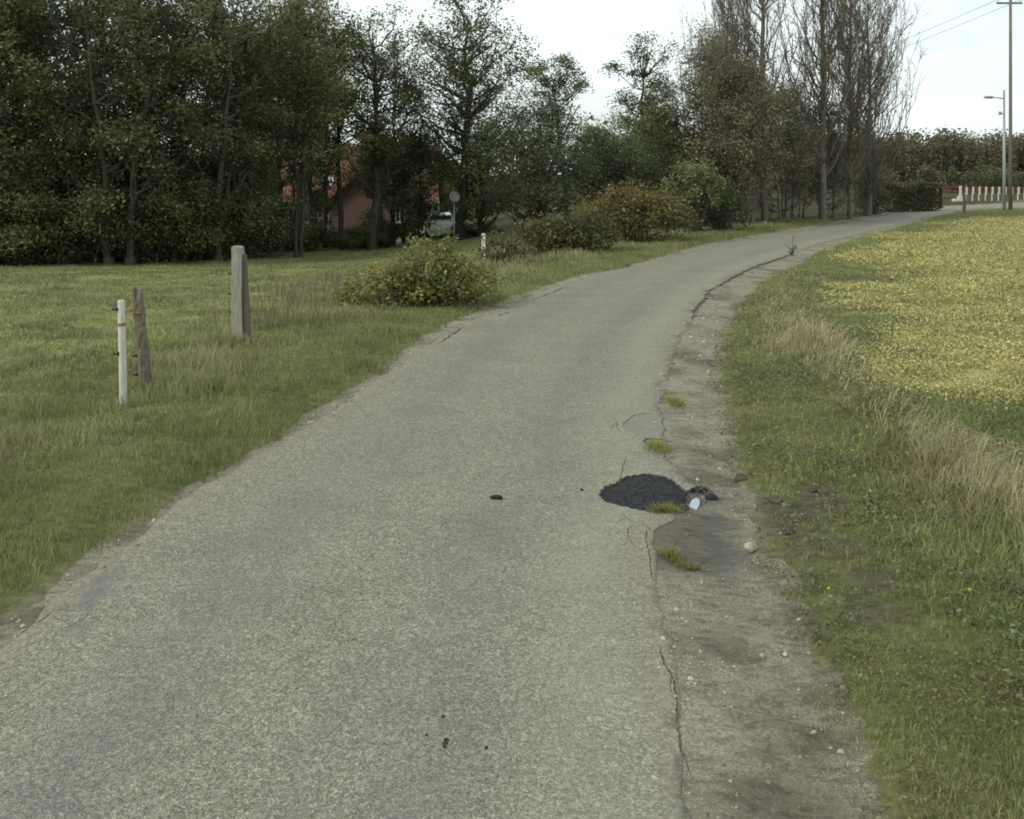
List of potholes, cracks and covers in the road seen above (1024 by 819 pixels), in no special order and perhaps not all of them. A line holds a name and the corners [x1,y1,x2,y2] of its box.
crack [615,511,653,582]
crack [657,644,697,784]
crack [692,255,790,318]
